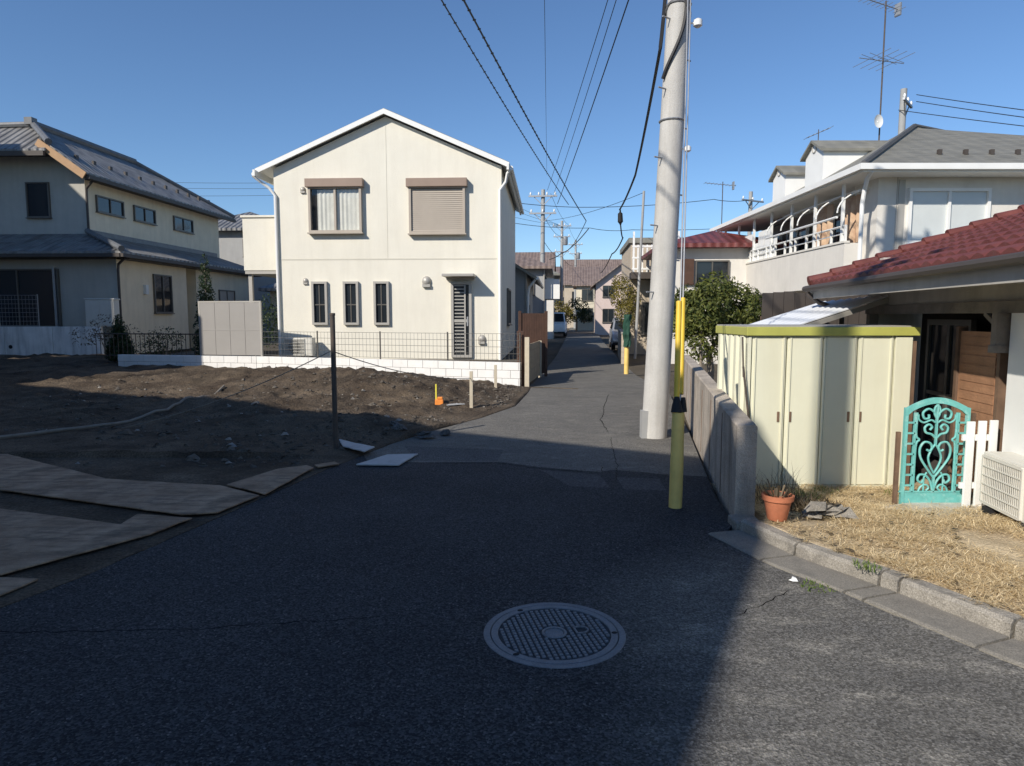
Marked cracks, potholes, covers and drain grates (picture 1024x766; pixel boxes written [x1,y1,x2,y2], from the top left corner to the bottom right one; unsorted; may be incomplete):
manhole cover [484,602,626,669]
crack [0,615,390,633]
crack [599,396,666,482]
